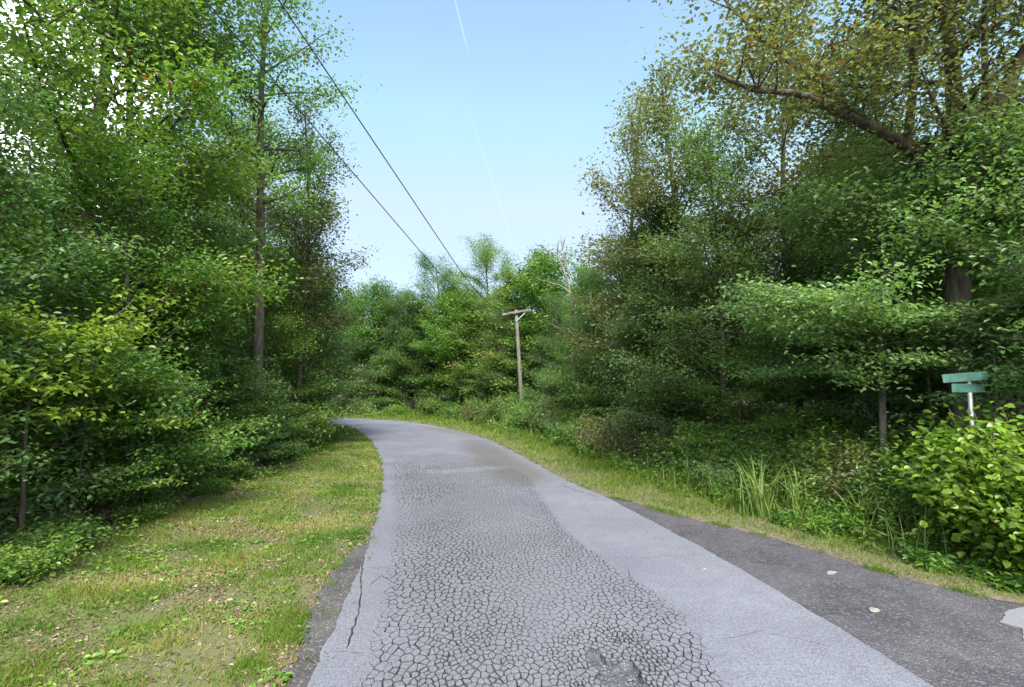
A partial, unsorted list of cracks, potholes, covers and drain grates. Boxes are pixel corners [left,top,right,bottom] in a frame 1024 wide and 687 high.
pothole [585,647,650,687]
crack [334,451,828,687]
